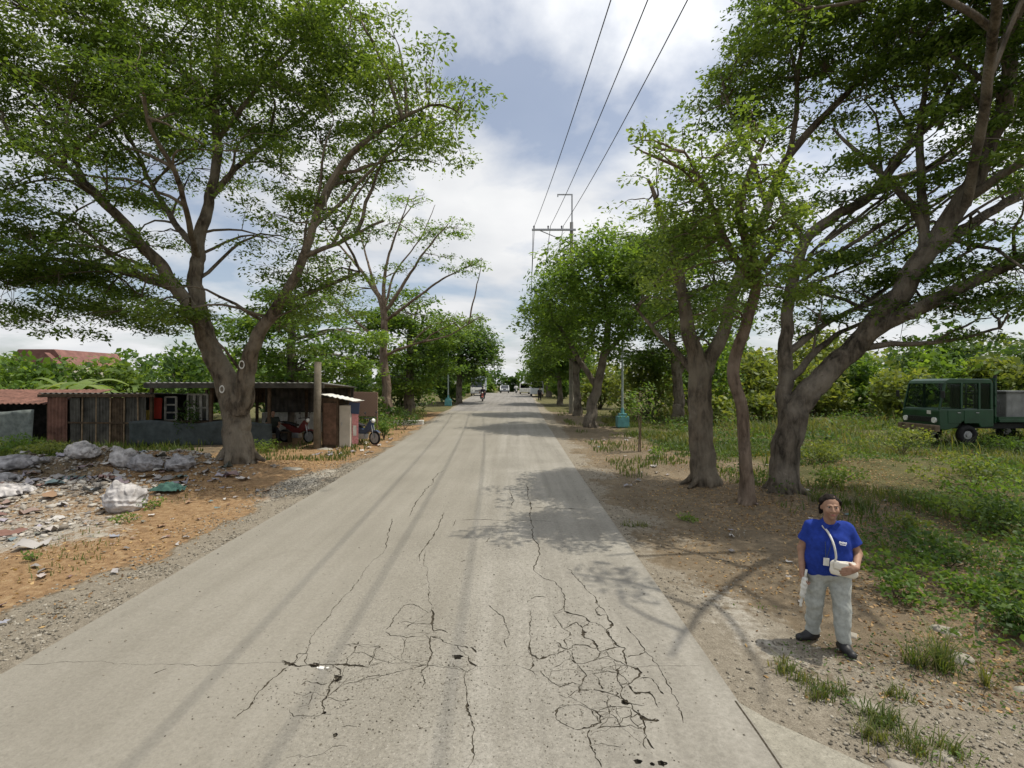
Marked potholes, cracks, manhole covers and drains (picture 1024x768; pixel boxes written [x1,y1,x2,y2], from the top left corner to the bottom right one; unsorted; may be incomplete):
crack [510,485,683,767]
crack [26,515,477,768]
